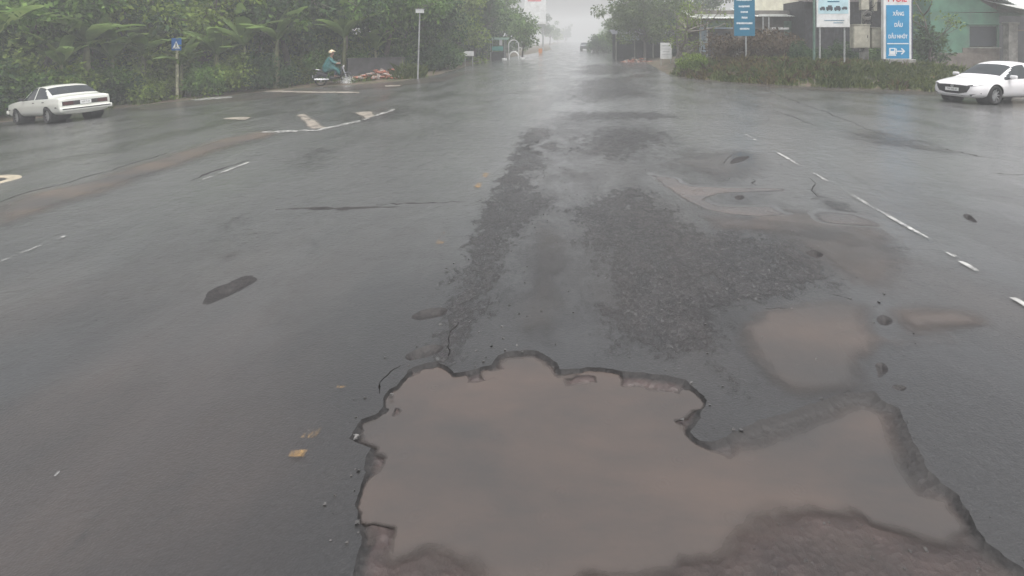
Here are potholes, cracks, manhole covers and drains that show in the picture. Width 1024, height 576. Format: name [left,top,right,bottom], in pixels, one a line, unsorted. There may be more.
pothole [807,209,887,229]
pothole [647,172,794,217]
pothole [876,315,893,326]
pothole [349,350,1024,576]
pothole [405,344,444,361]
